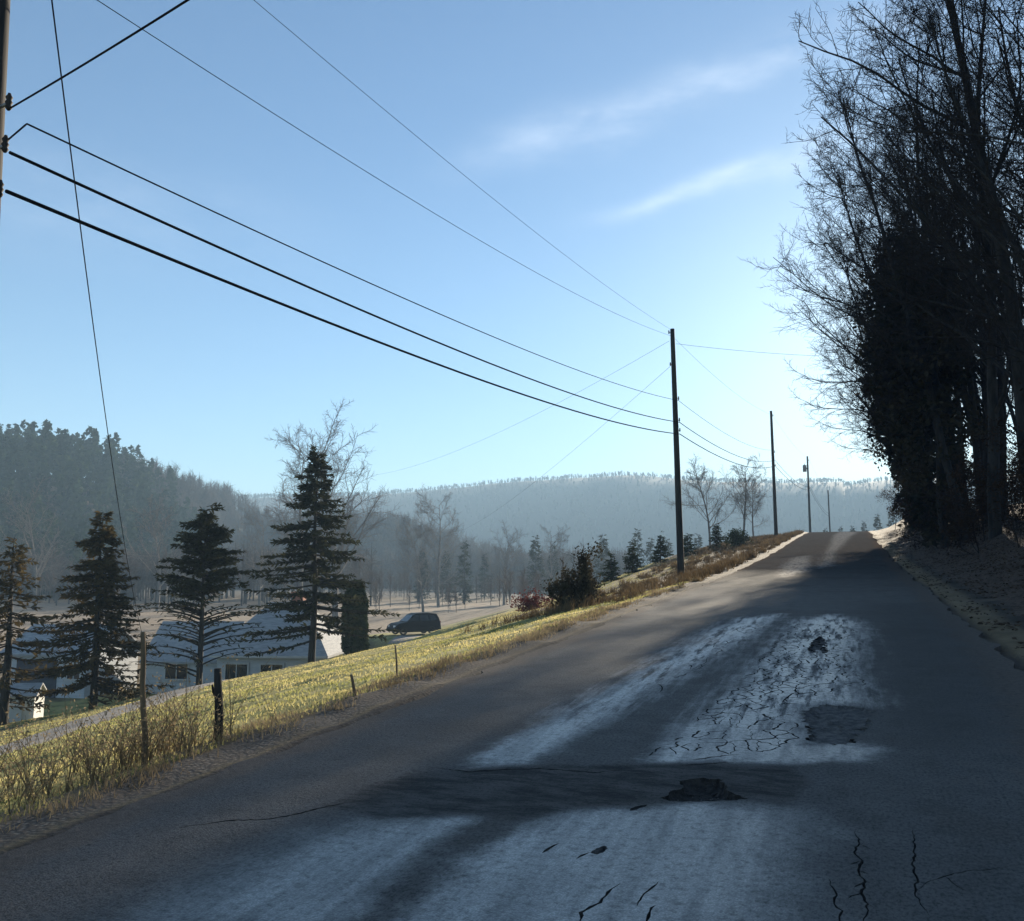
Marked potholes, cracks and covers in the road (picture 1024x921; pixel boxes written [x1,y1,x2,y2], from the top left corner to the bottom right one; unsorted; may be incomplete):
crack [637,883,658,921]
pothole [661,778,748,802]
crack [649,623,866,765]
crack [911,830,1009,915]
pothole [808,636,828,654]
crack [830,832,874,921]
crack [181,803,343,828]
